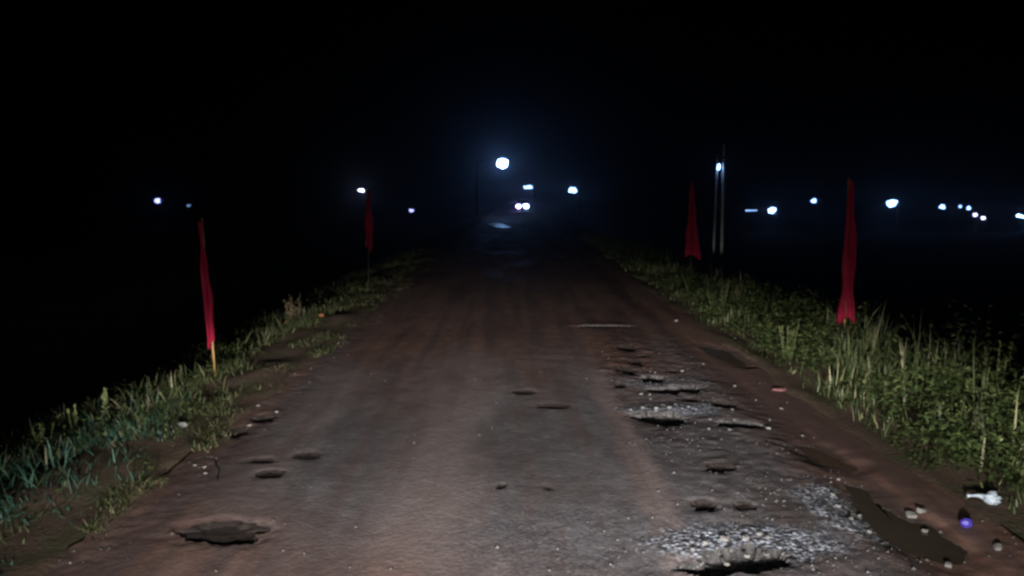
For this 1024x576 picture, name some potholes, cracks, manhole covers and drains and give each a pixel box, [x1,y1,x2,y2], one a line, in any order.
pothole [689,499,719,511]
pothole [249,414,277,423]
pothole [255,469,287,478]
pothole [639,374,667,384]
pothole [174,520,271,546]
pothole [843,484,968,564]
pothole [713,419,766,429]
pothole [291,452,321,460]
pothole [670,543,797,576]
pothole [732,501,757,511]
